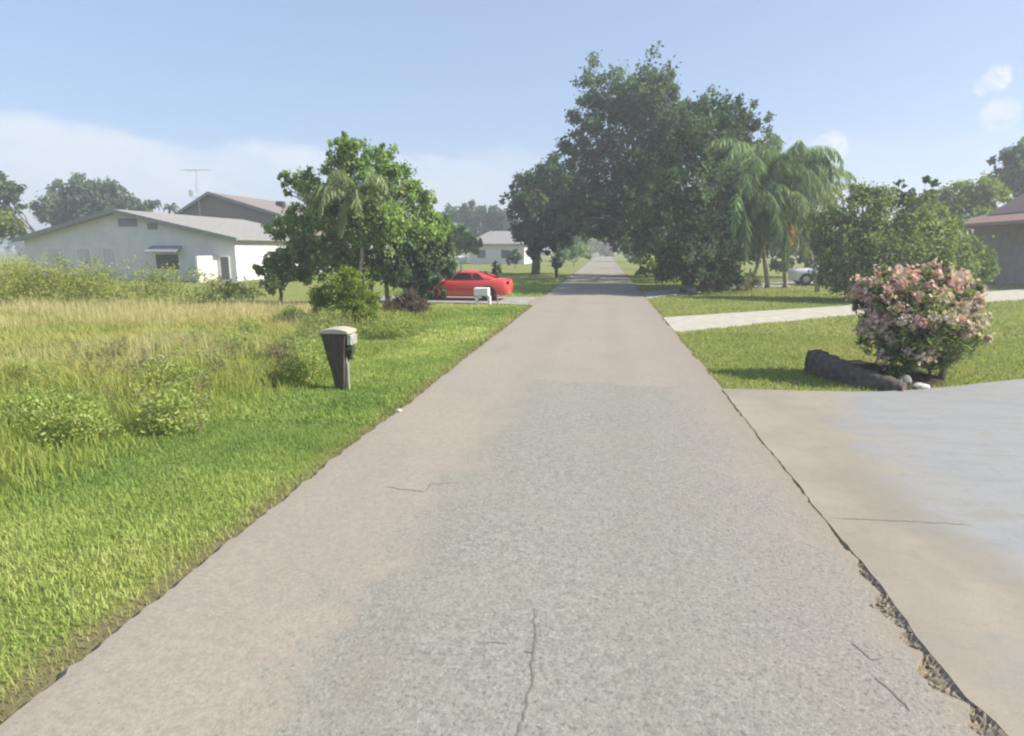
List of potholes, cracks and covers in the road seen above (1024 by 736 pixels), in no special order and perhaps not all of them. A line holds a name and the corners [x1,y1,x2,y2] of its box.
crack [722,391,952,551]
crack [875,677,910,711]
crack [477,613,537,736]
